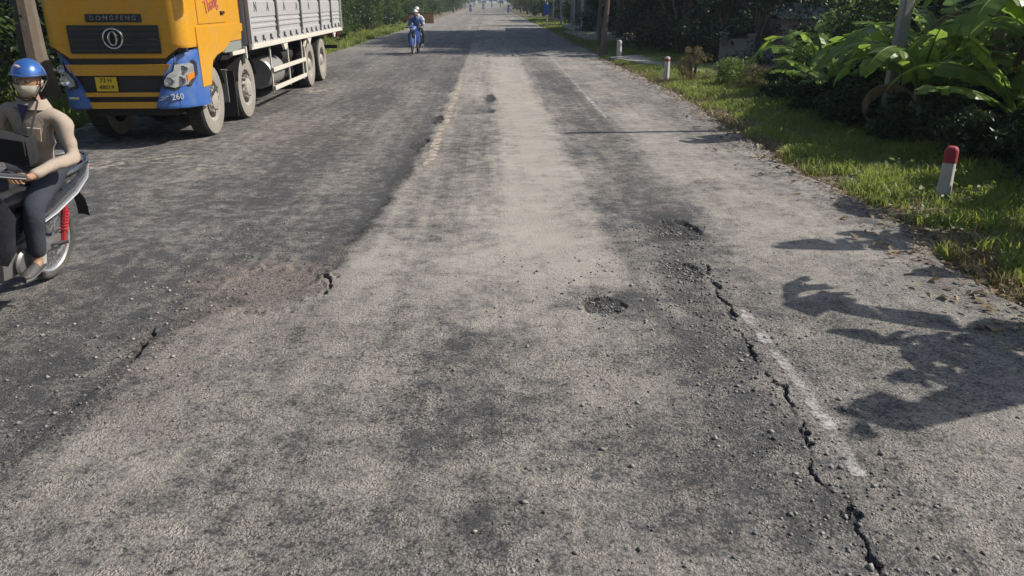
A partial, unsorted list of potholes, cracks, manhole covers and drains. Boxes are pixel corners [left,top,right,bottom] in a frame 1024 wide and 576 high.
crack [697,259,895,576]
pothole [651,218,707,241]
pothole [662,261,707,280]
crack [119,326,161,367]
pothole [576,296,632,315]
pothole [483,93,499,103]
pothole [429,114,445,126]
